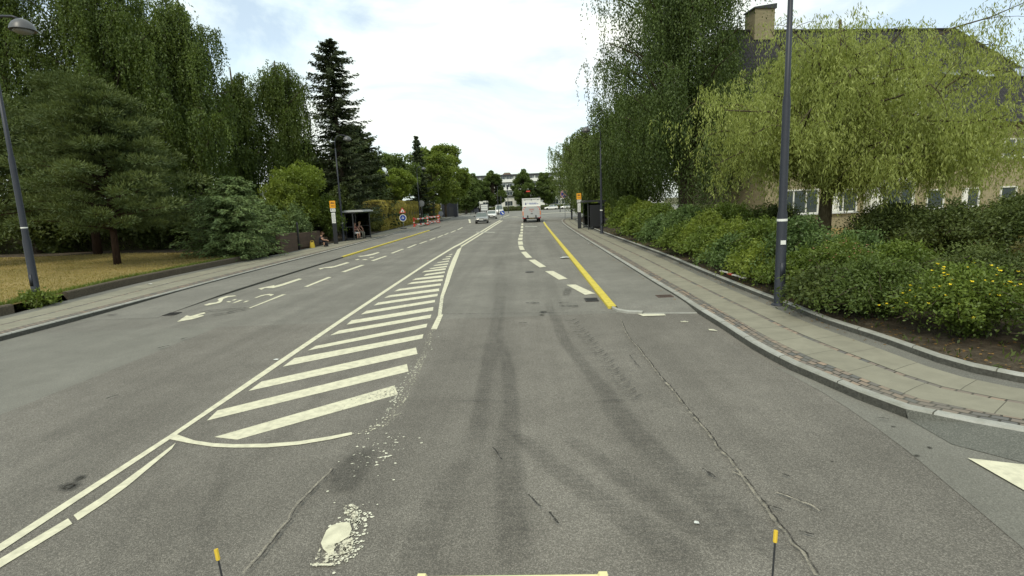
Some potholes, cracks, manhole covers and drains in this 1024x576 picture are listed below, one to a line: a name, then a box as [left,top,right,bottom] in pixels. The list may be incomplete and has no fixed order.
crack [622,321,822,575]
crack [243,468,334,573]
